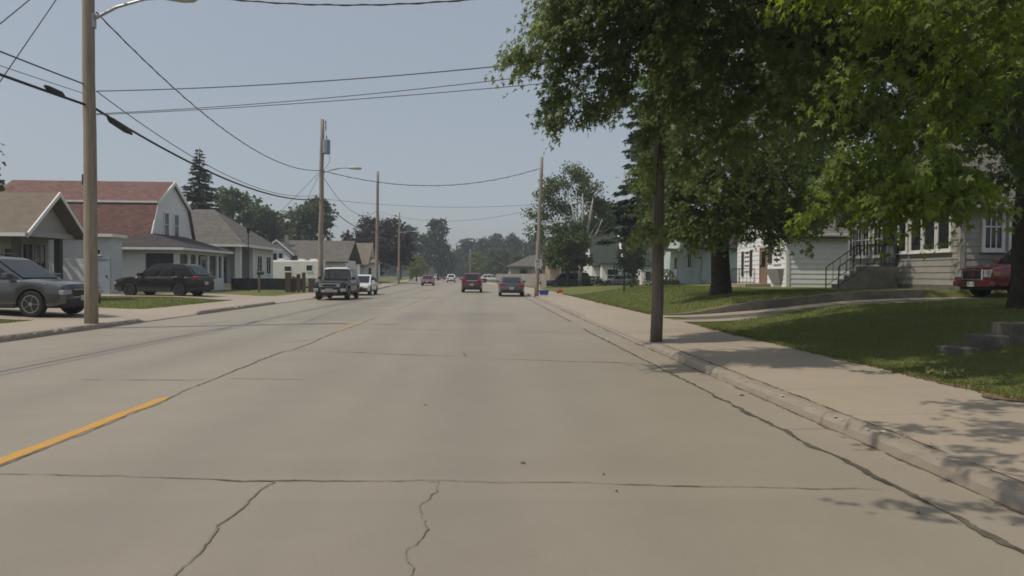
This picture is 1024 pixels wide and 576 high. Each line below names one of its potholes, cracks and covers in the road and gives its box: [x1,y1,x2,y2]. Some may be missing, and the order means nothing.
crack [0,296,1024,576]
